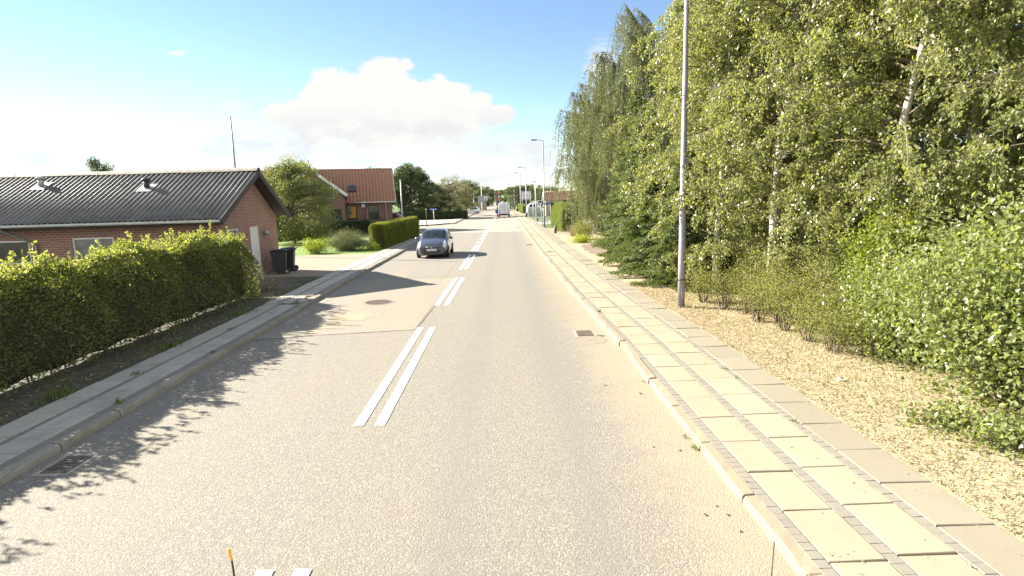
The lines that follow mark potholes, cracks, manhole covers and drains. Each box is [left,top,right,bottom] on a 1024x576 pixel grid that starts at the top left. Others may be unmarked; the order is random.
drain grate [29,454,99,477]
